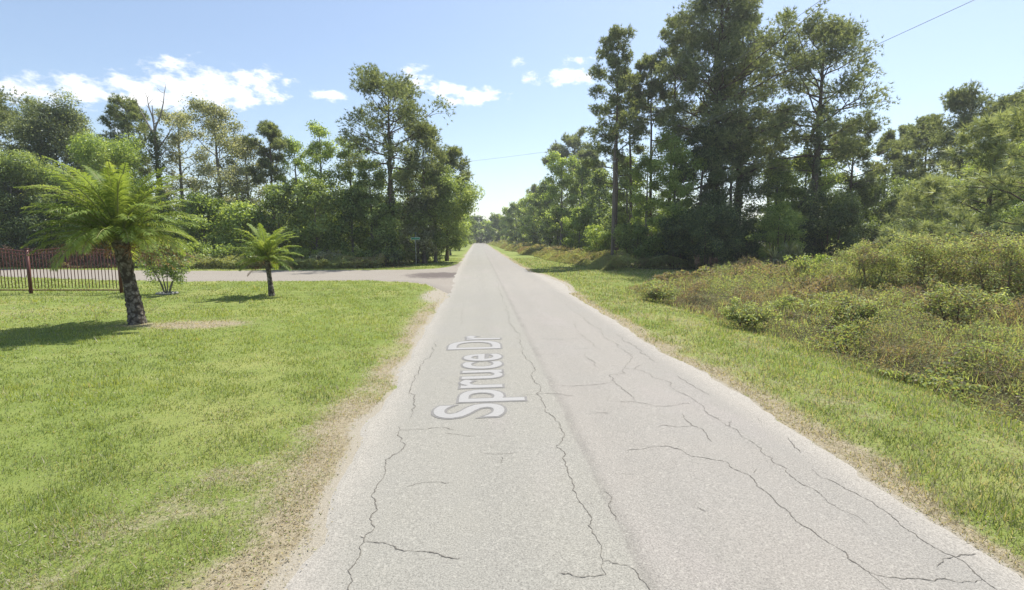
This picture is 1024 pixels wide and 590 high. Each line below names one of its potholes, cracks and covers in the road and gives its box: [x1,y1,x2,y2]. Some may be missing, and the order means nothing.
crack [564,309,996,589]
crack [347,344,465,590]
crack [498,285,650,589]
